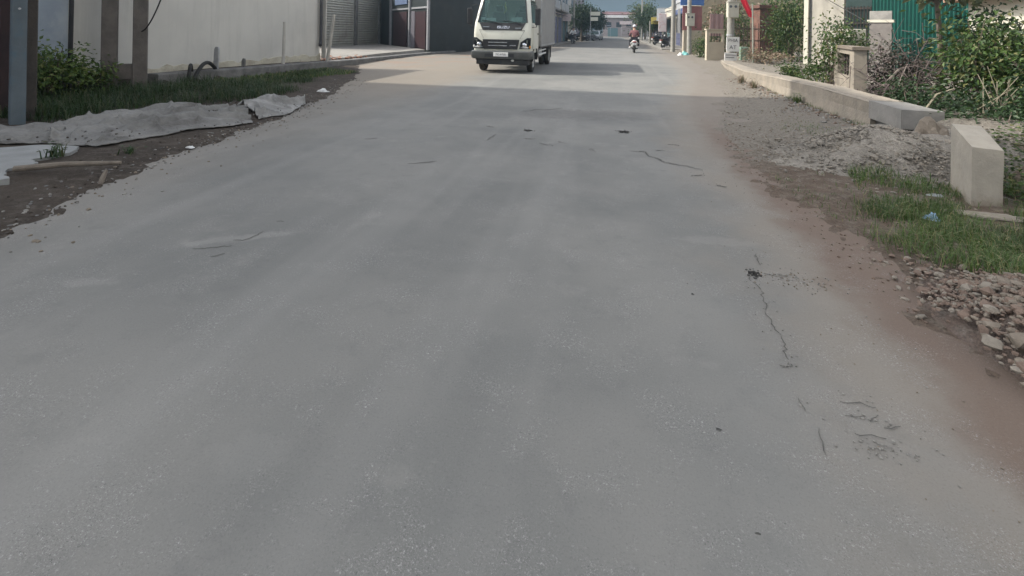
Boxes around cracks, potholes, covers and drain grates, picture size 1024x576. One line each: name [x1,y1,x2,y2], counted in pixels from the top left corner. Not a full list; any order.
crack [487,125,926,453]
